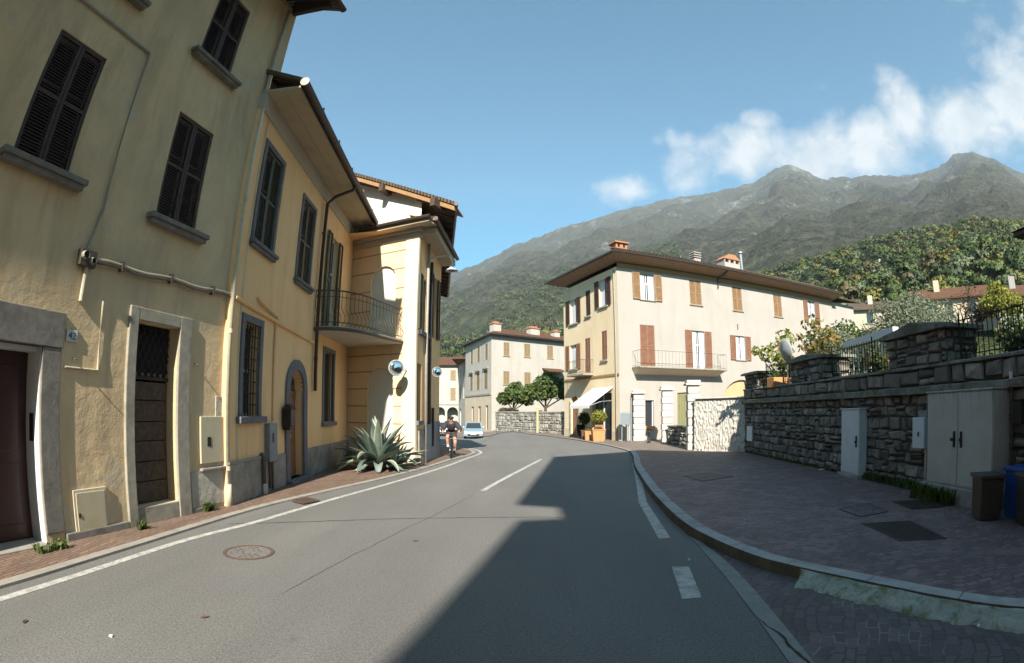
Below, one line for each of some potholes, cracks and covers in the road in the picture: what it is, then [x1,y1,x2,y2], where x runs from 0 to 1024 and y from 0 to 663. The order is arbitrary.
manhole cover [223,545,275,560]
manhole cover [684,473,734,481]
manhole cover [839,503,888,517]
